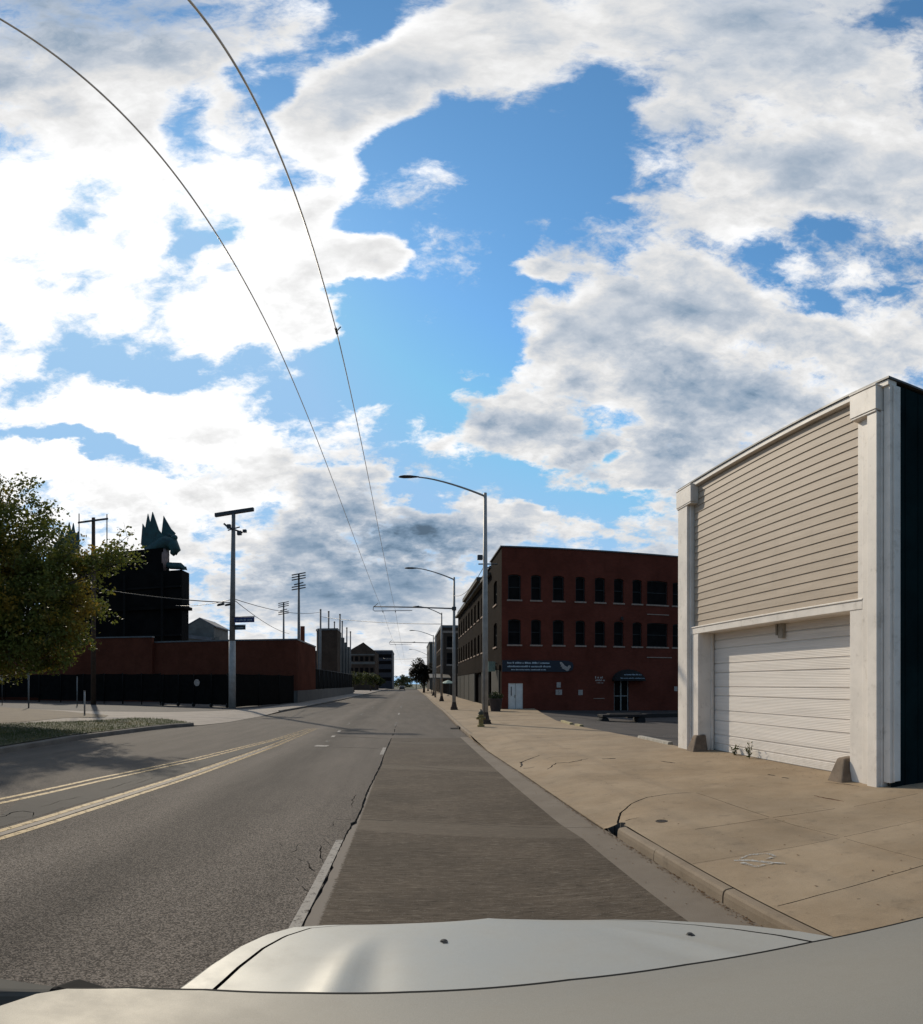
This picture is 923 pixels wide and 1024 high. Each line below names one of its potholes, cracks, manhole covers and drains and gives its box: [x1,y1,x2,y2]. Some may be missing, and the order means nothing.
crack [281,712,486,927]
